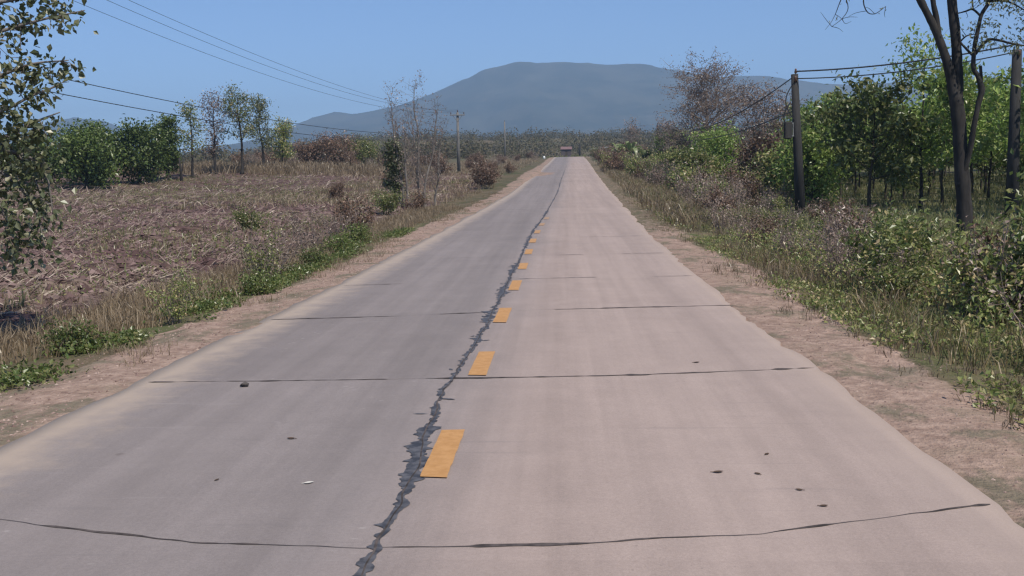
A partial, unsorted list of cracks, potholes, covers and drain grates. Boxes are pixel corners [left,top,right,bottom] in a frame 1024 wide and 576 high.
crack [297,305,724,319]
crack [371,275,687,285]
